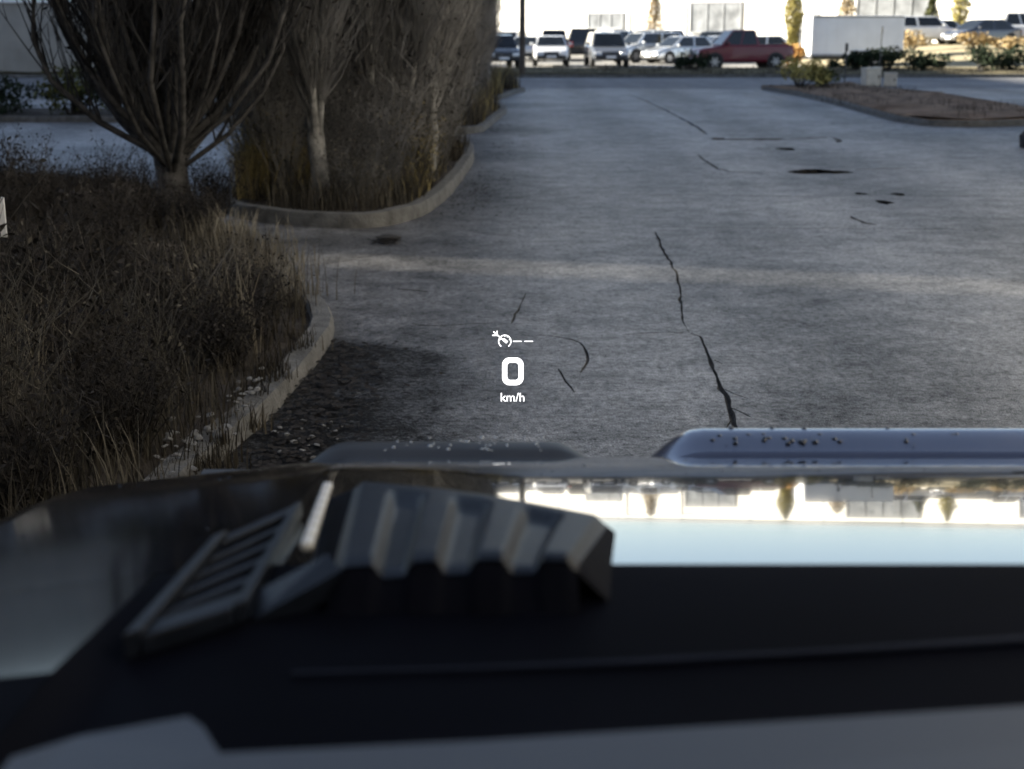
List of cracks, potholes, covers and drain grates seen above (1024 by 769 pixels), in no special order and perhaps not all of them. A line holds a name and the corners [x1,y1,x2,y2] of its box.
crack [543,335,589,393]
crack [624,216,1024,428]
crack [636,97,842,173]
crack [511,293,526,324]
